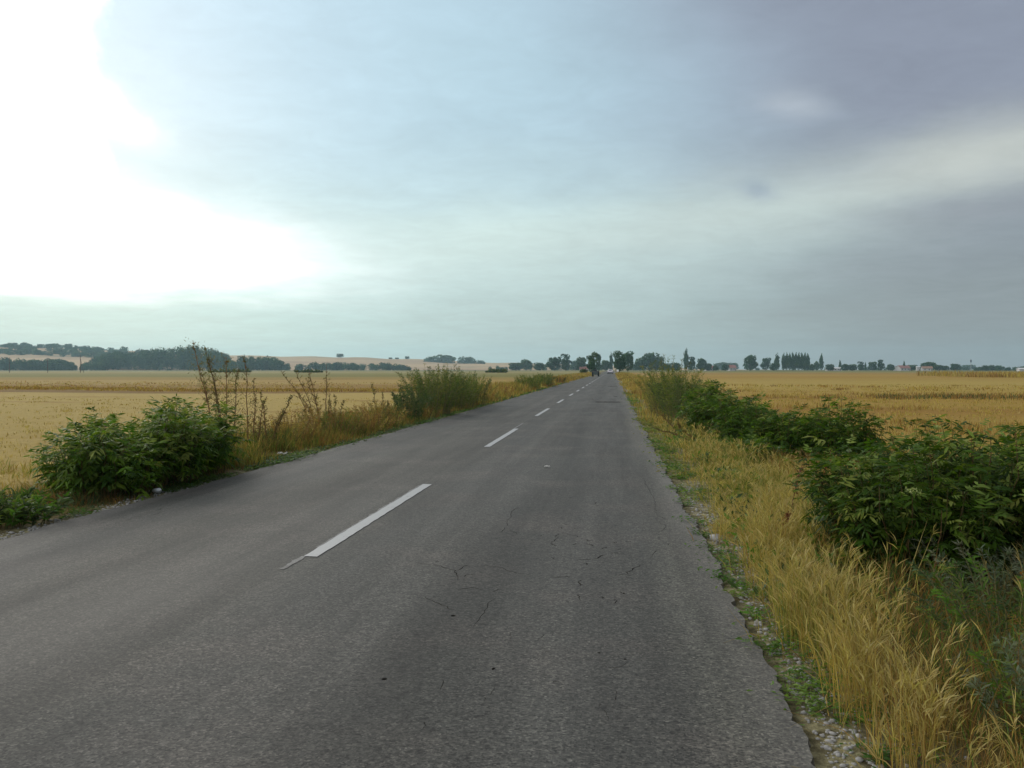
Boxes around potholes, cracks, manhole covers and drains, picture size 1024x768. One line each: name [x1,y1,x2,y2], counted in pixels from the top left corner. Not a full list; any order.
crack [541,480,672,603]
crack [417,561,520,625]
